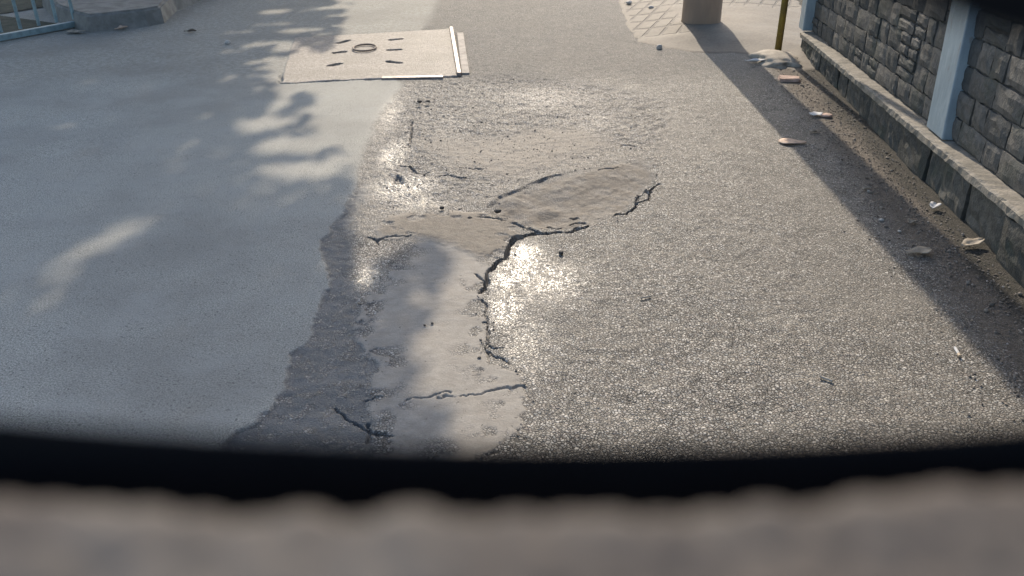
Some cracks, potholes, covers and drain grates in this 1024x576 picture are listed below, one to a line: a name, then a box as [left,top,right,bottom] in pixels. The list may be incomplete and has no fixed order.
manhole cover [281,27,470,83]
crack [402,166,484,179]
crack [336,386,526,443]
crack [367,235,410,246]
crack [475,185,658,364]
